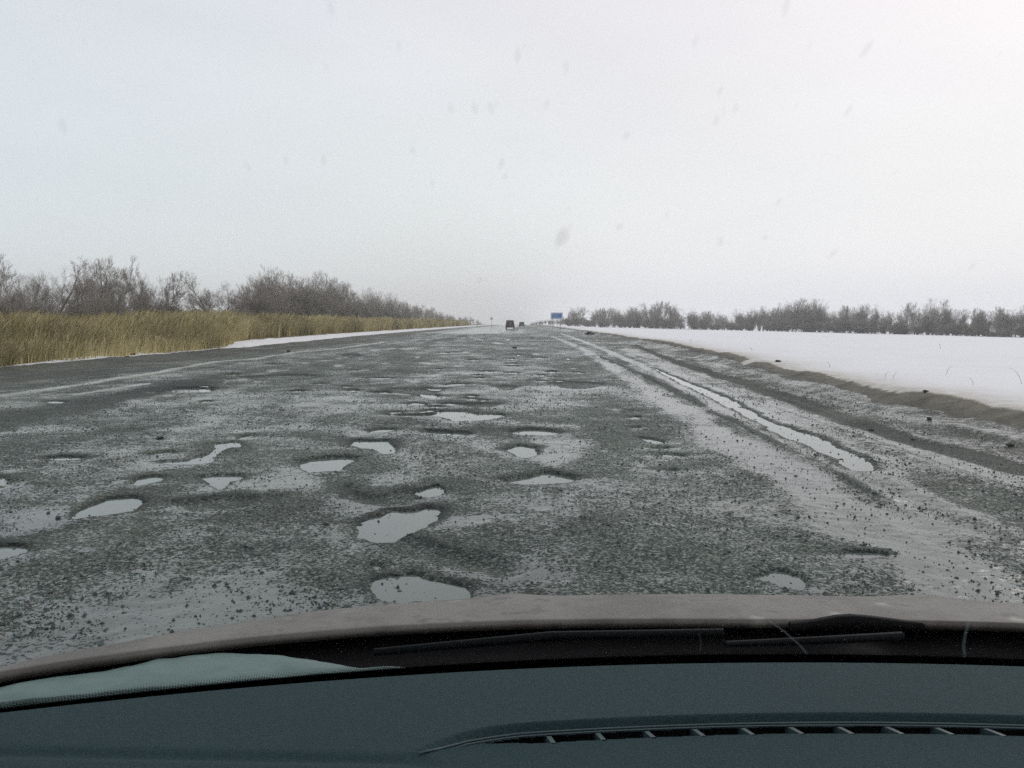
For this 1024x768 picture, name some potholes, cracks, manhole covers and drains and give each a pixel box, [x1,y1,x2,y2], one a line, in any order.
pothole [67,495,146,519]
pothole [151,440,245,465]
pothole [497,470,582,484]
pothole [506,427,564,435]
pothole [130,474,168,486]
pothole [0,543,30,560]
pothole [291,454,363,473]
pothole [502,444,539,458]
pothole [429,409,509,421]
pothole [197,473,245,490]
pothole [347,439,399,454]
pothole [638,436,666,444]
